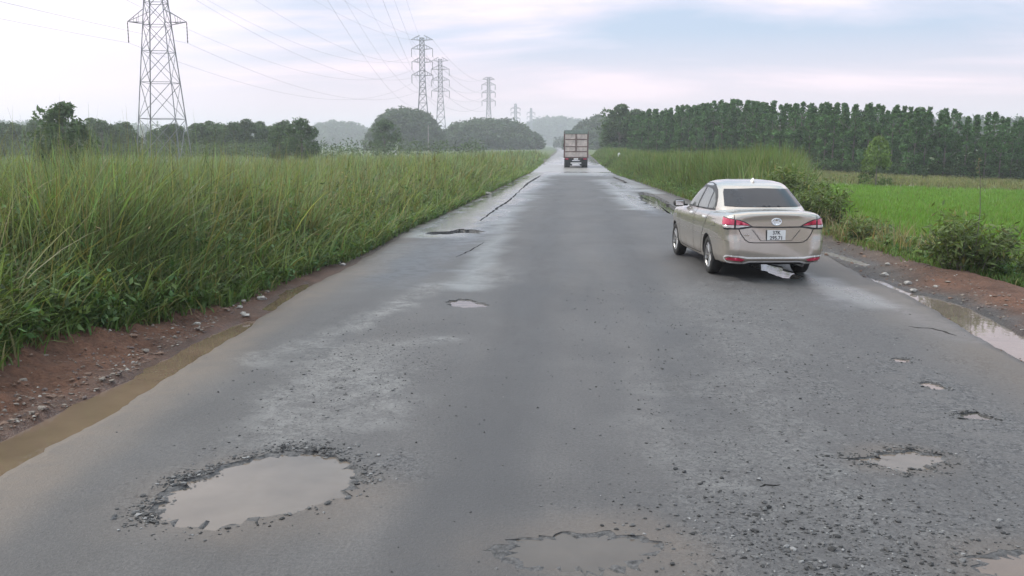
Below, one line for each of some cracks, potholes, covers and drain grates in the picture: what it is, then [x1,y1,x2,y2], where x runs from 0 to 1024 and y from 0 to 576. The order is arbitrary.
pothole [484,530,664,576]
crack [480,176,540,221]
pothole [148,451,365,531]
pothole [446,299,490,308]
pothole [957,412,993,420]
pothole [842,449,948,473]
pothole [963,549,1024,576]
pothole [919,382,946,390]
